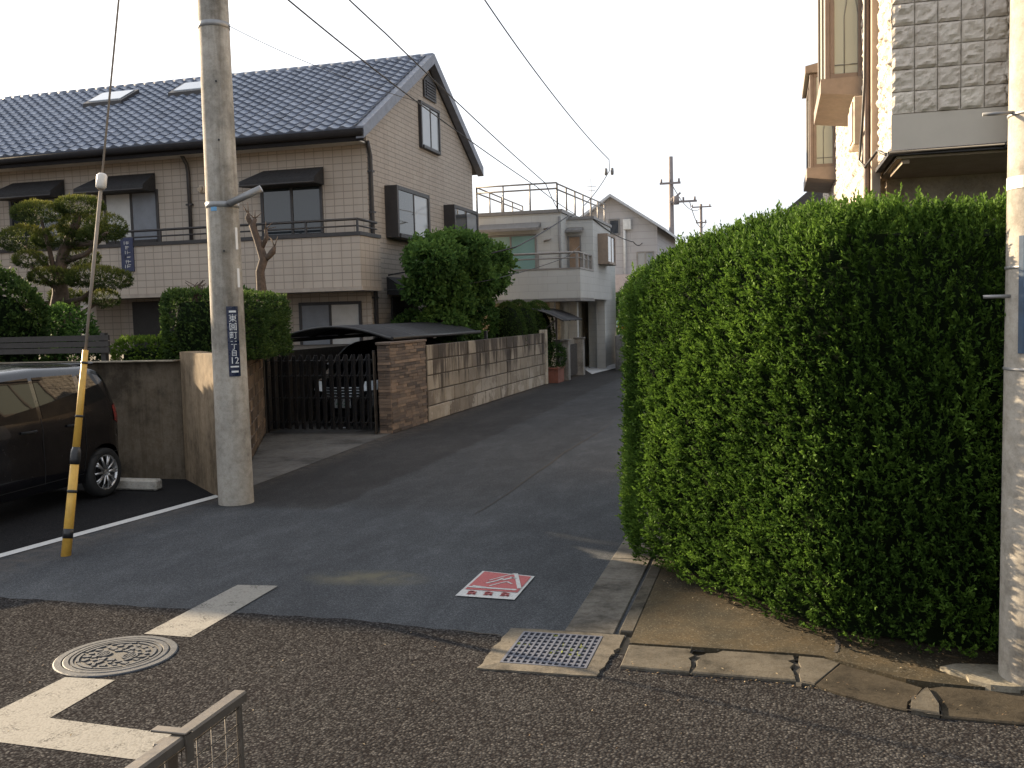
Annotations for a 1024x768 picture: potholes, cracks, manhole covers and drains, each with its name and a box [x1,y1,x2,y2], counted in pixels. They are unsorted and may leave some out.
crack [906,687,943,715]
crack [813,637,841,684]
drain grate [477,628,625,678]
manhole cover [52,636,178,678]
